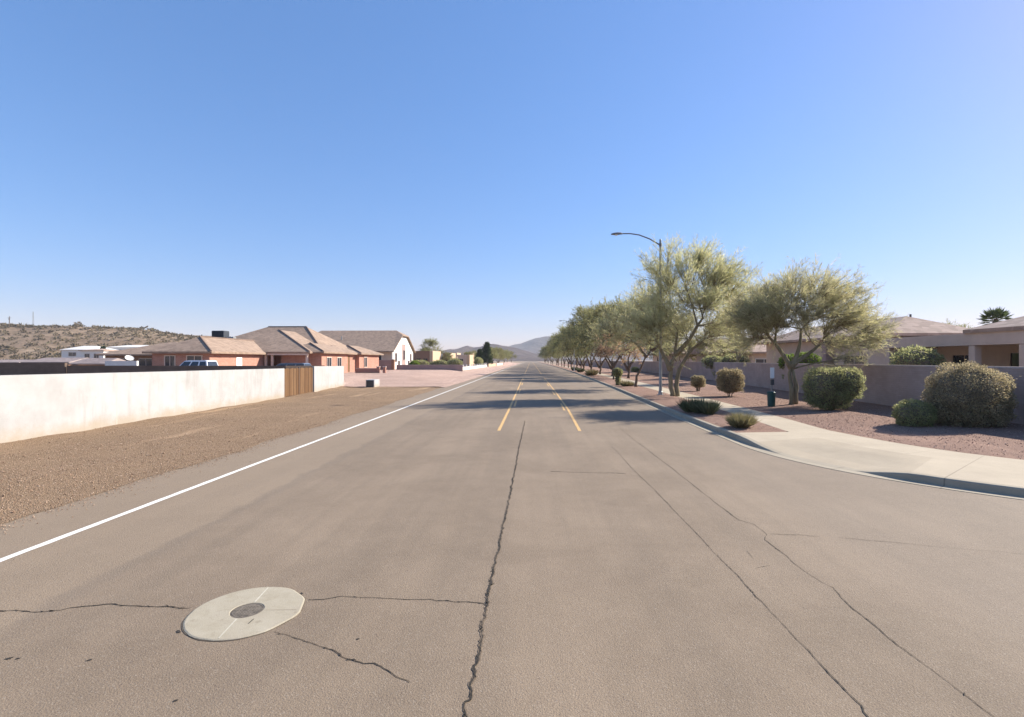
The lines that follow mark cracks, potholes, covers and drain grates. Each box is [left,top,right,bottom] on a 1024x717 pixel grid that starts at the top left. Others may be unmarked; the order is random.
crack [275,631,410,682]
manhole cover [182,587,306,641]
crack [622,438,994,717]
crack [0,603,187,612]
crack [309,421,525,717]
